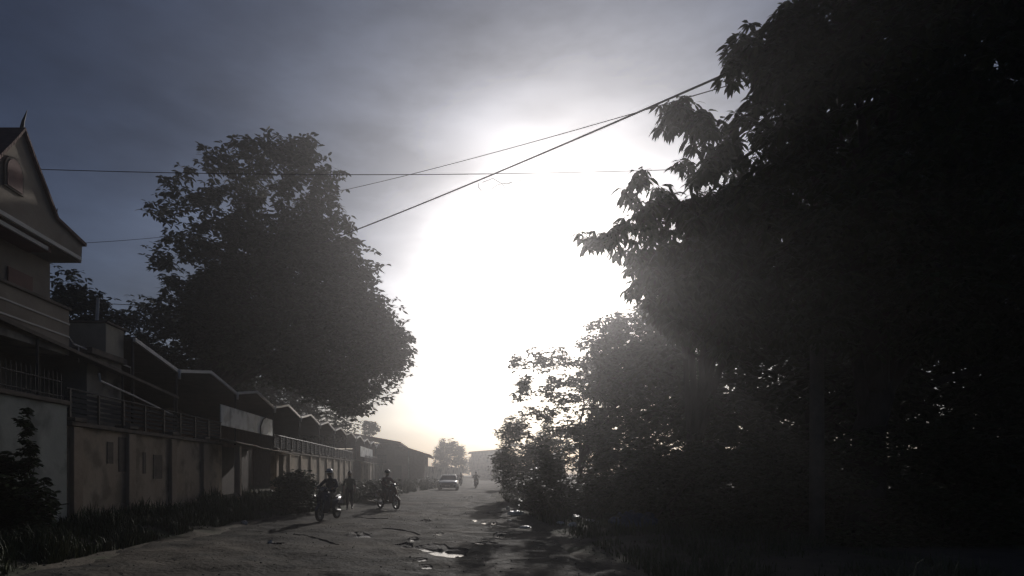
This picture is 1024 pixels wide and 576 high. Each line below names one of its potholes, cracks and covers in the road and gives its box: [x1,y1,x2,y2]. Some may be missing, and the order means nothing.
crack [294,508,420,545]
pothole [413,543,469,558]
